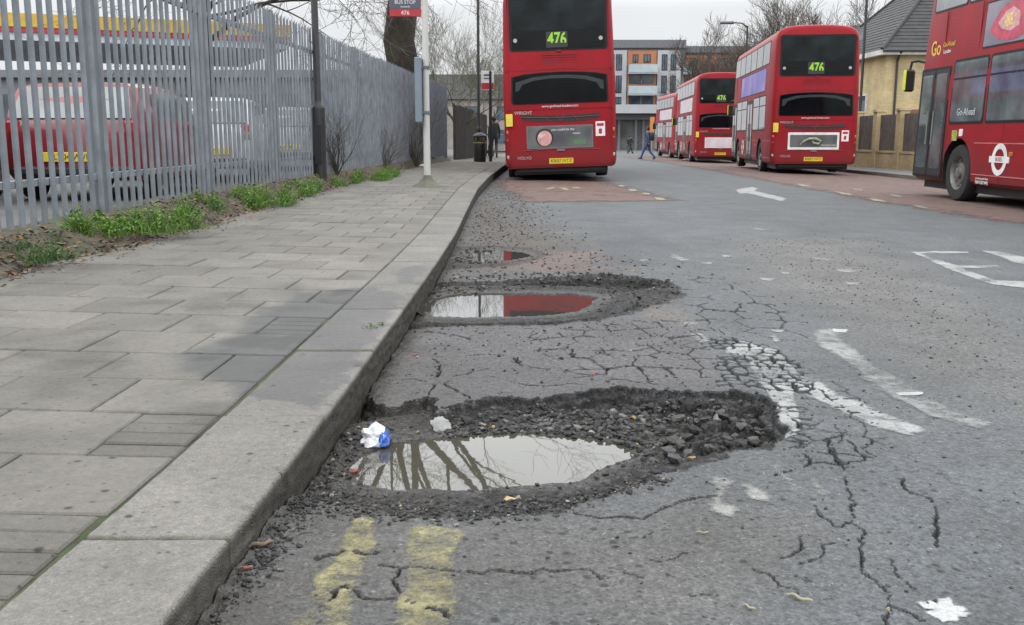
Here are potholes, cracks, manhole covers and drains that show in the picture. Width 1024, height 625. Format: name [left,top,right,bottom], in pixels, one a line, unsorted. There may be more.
crack [897,470,942,548]
crack [388,275,926,625]
pothole [410,274,689,331]
pothole [444,246,553,271]
pothole [295,385,792,520]
